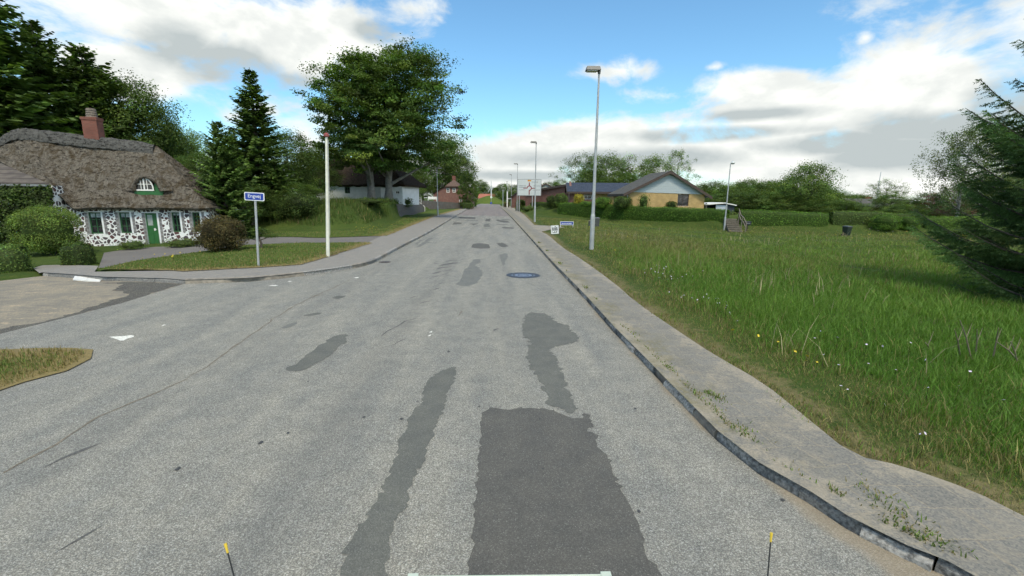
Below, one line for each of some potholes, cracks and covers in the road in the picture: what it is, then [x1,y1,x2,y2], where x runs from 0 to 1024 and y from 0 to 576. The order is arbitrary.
crack [45,443,100,467]
crack [53,524,104,554]
crack [381,259,463,347]
